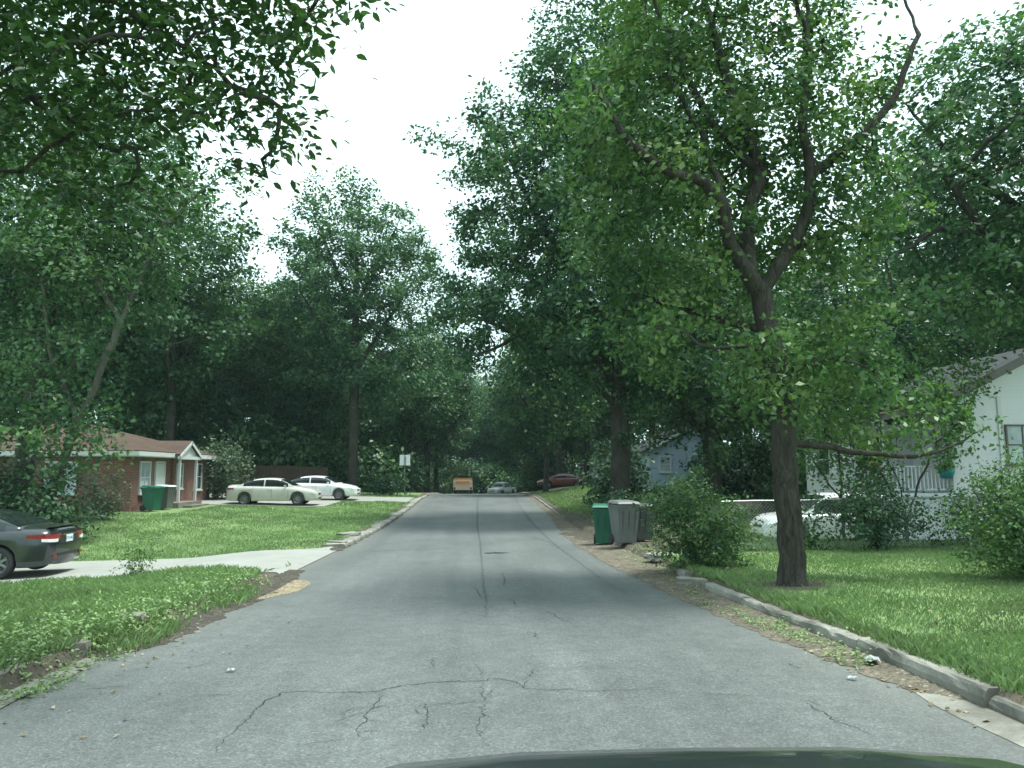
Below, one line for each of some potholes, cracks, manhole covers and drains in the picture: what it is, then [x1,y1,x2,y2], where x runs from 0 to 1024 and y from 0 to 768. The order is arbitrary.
crack [216,657,758,751]
